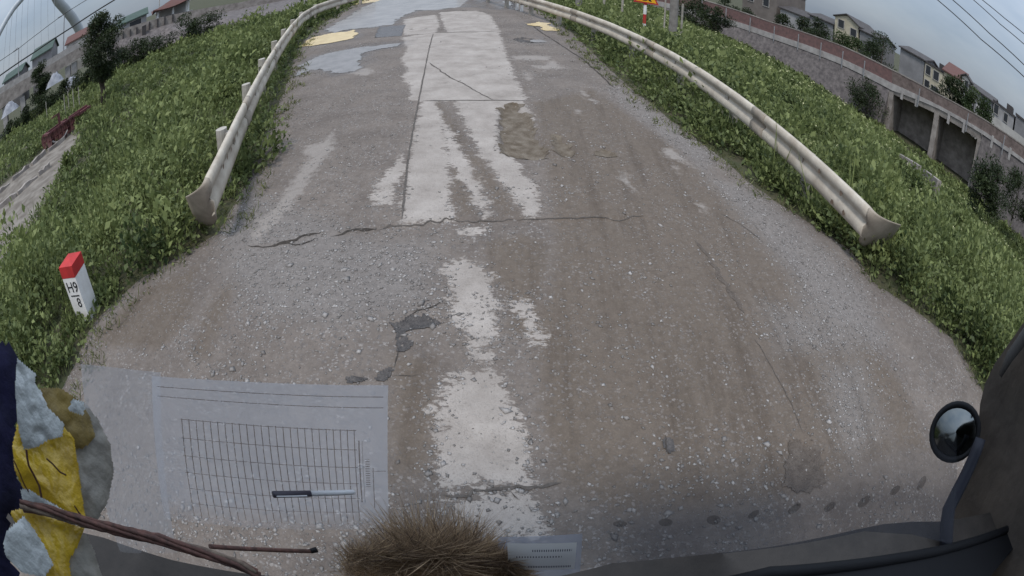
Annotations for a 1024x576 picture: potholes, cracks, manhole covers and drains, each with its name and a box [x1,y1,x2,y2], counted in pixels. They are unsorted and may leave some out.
pothole [389,313,441,352]
crack [248,215,636,247]
pothole [345,367,394,383]
pothole [662,437,675,453]
crack [442,482,561,499]
